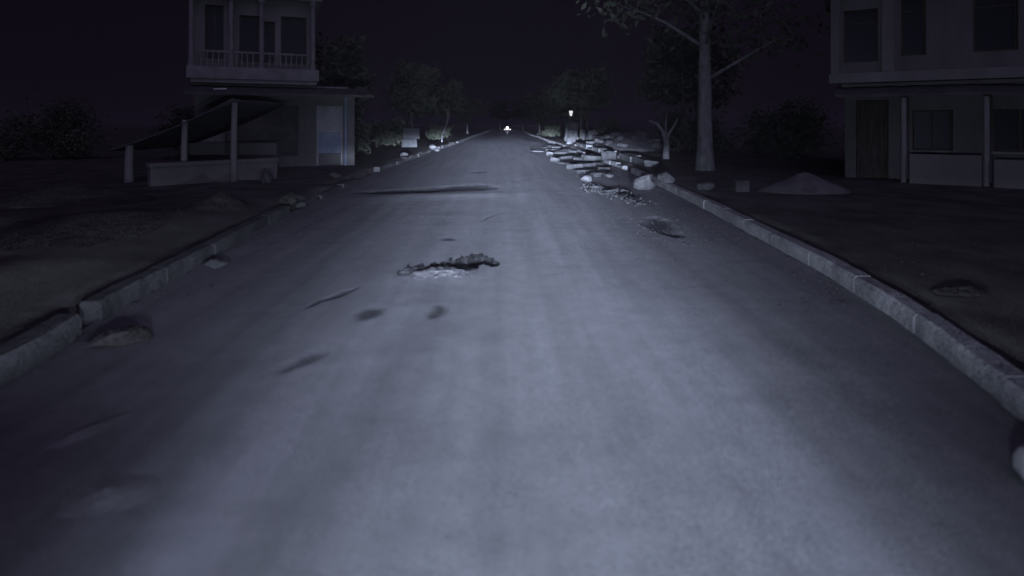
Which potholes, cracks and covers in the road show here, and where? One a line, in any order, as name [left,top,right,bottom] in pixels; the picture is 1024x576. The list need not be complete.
pothole [349,307,388,322]
crack [302,287,360,309]
pothole [393,252,500,281]
pothole [421,303,450,323]
pothole [348,184,503,194]
